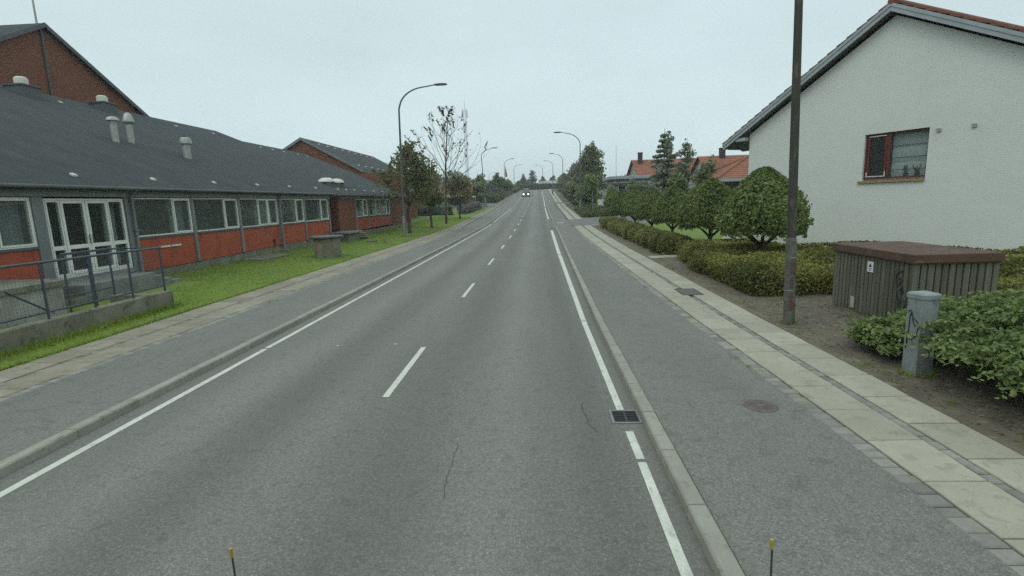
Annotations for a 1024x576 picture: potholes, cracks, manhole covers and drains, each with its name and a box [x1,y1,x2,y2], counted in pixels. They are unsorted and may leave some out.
drain grate [608,410,643,424]
manhole cover [674,288,704,296]
manhole cover [743,399,779,413]
